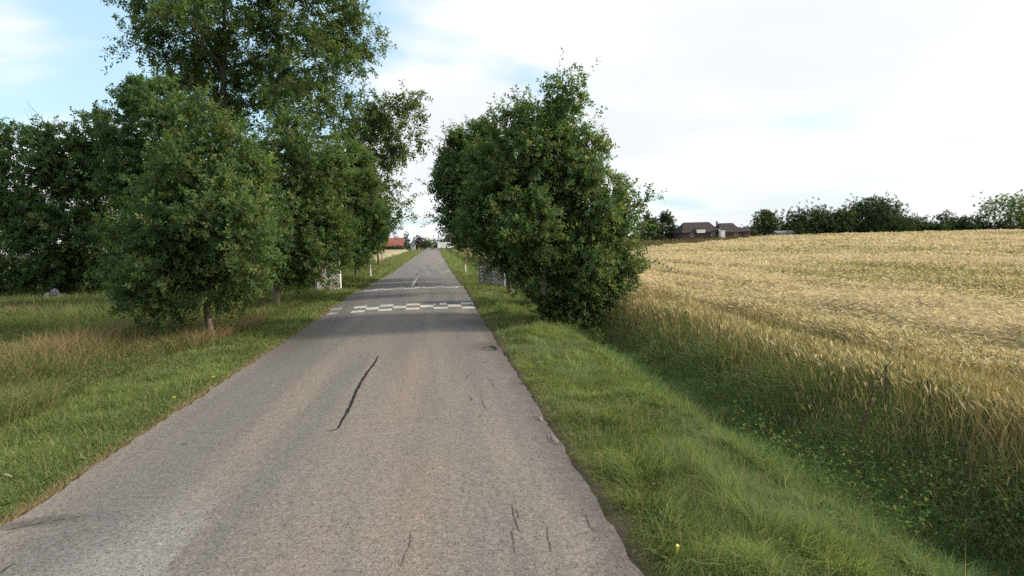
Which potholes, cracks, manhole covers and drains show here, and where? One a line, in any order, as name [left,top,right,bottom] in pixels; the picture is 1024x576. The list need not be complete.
crack [511,505,522,554]
